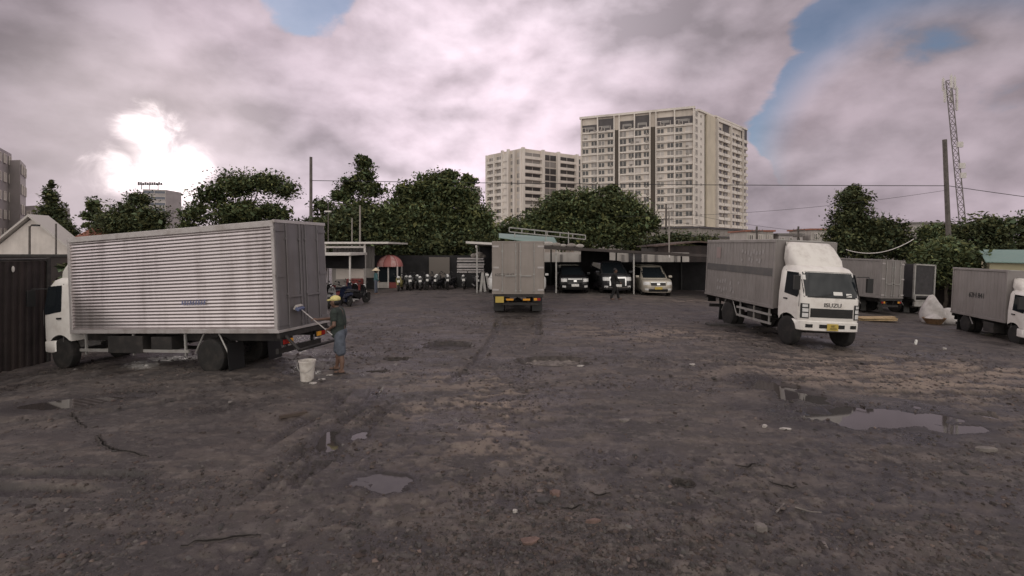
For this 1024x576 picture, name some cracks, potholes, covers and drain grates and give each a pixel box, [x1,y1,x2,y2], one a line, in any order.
pothole [422,340,476,351]
crack [180,534,260,548]
crack [67,412,148,458]
